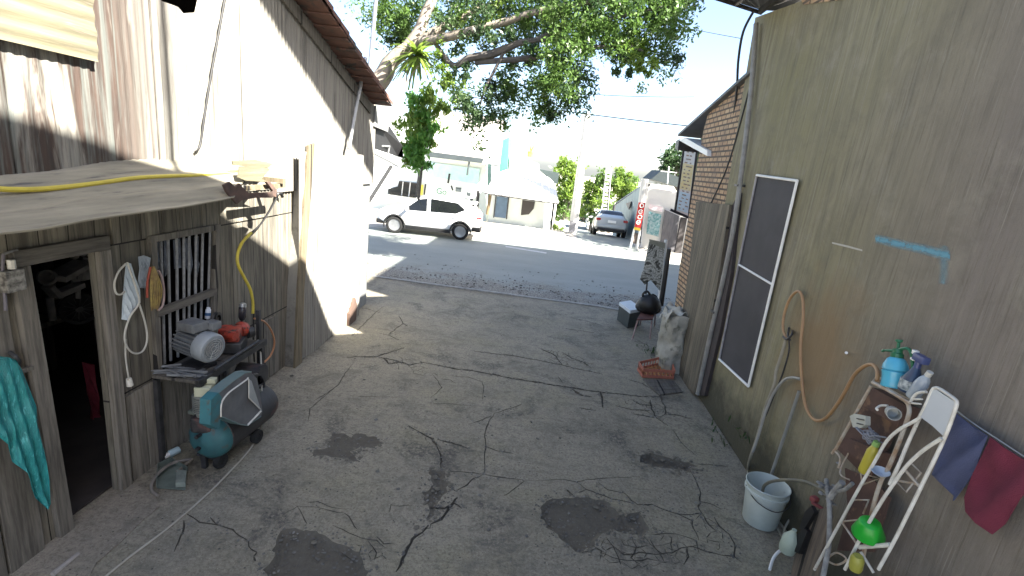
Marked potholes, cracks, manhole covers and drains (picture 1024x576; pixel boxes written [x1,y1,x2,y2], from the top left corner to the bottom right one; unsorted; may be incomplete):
crack [174,512,257,561]
pothole [540,497,650,553]
pothole [263,528,368,576]
crack [282,306,741,572]
pothole [639,453,697,473]
